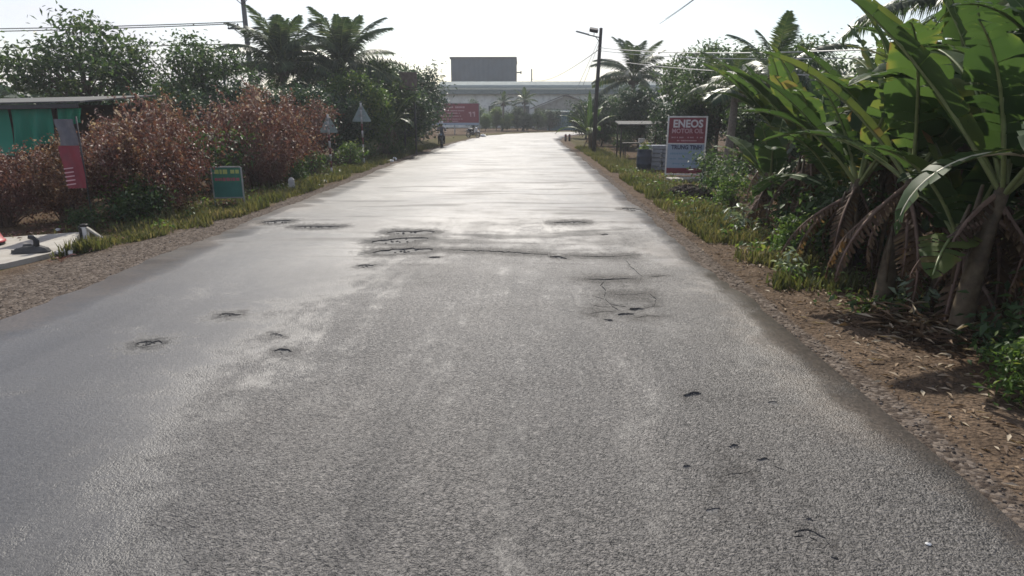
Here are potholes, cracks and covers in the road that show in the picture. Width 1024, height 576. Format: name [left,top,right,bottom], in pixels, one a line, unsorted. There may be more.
crack [463,250,665,318]
crack [794,529,831,546]
